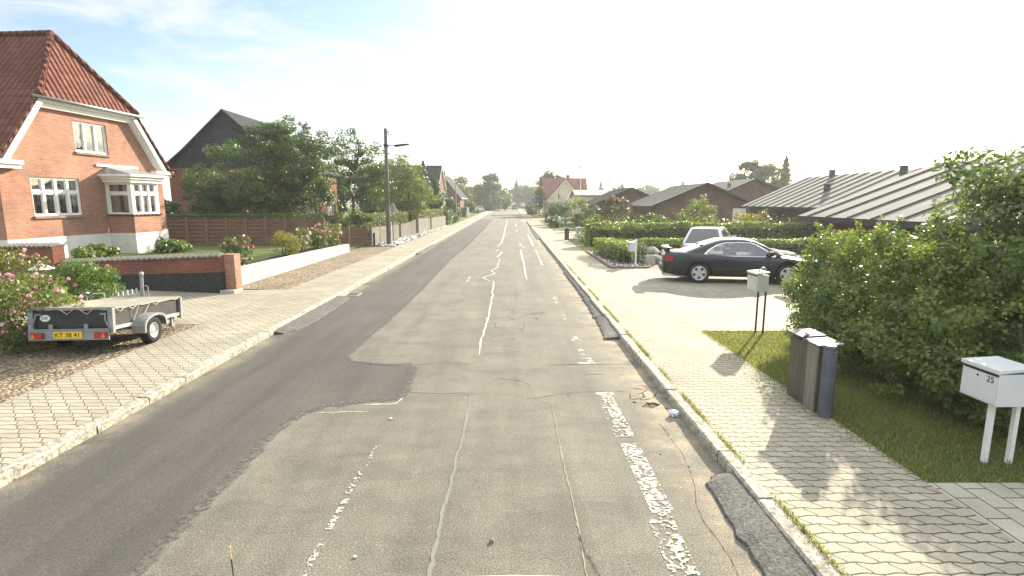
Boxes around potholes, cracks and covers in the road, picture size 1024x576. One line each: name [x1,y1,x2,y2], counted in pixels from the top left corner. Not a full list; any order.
crack [501,378,657,576]
crack [660,424,739,576]
